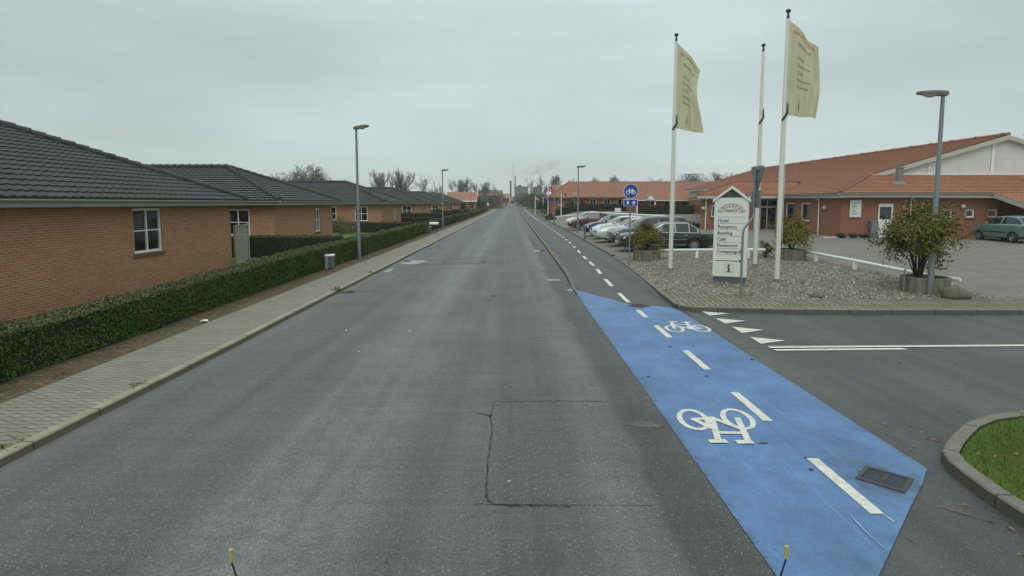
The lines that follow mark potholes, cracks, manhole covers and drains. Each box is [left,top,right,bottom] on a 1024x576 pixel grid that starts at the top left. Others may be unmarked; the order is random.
drain grate [855,465,914,493]
